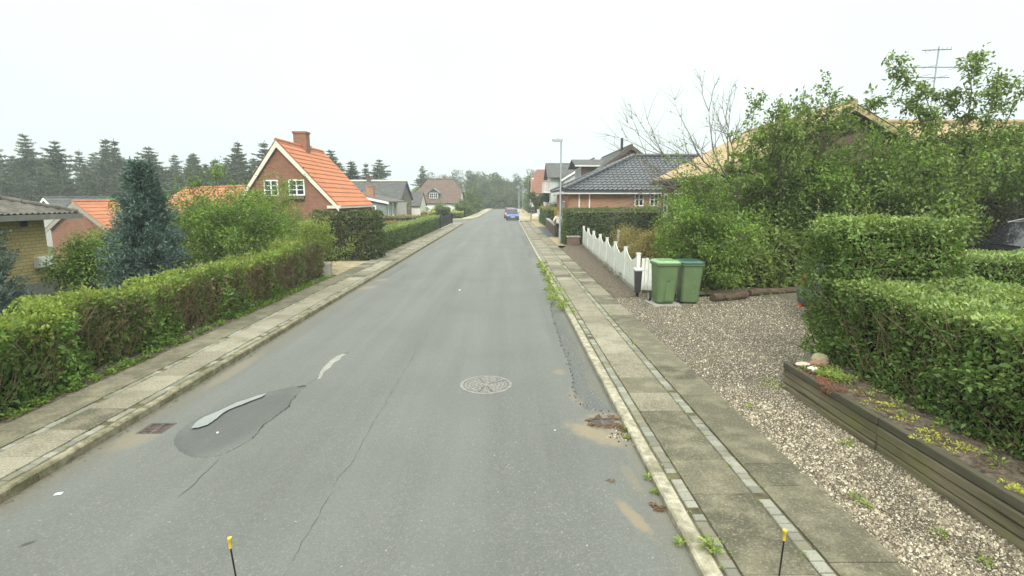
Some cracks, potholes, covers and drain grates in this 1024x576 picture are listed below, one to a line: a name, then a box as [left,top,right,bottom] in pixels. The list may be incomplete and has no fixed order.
drain grate [136,423,177,434]
manhole cover [460,376,512,394]
crack [284,270,466,575]
